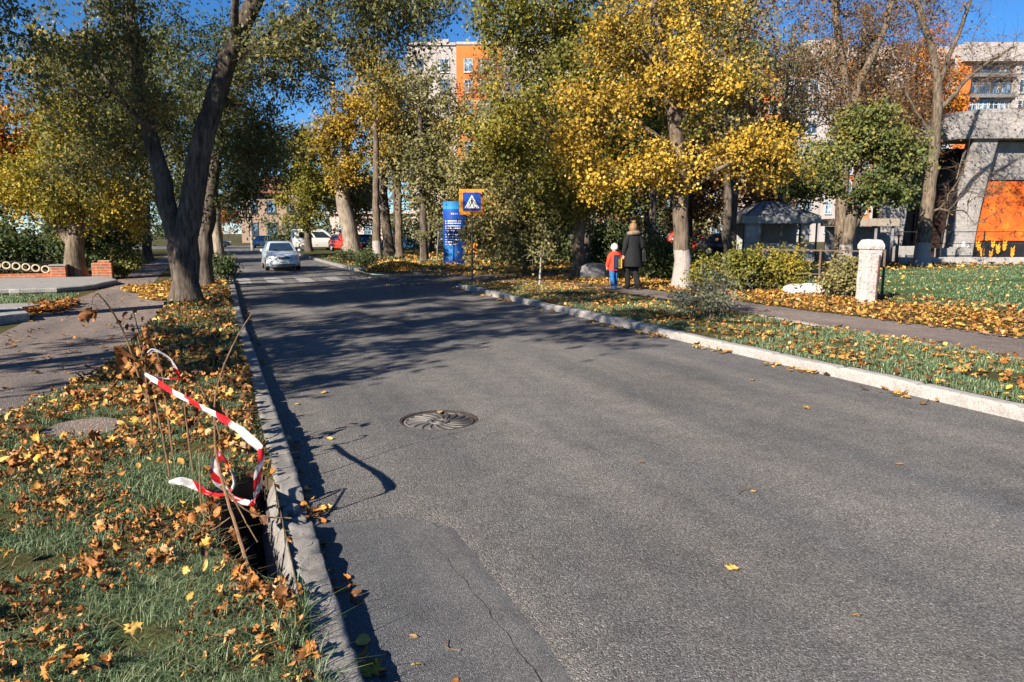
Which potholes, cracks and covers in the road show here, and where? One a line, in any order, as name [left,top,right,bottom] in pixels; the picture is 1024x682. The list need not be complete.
crack [425,538,543,682]
manhole cover [399,410,478,430]
